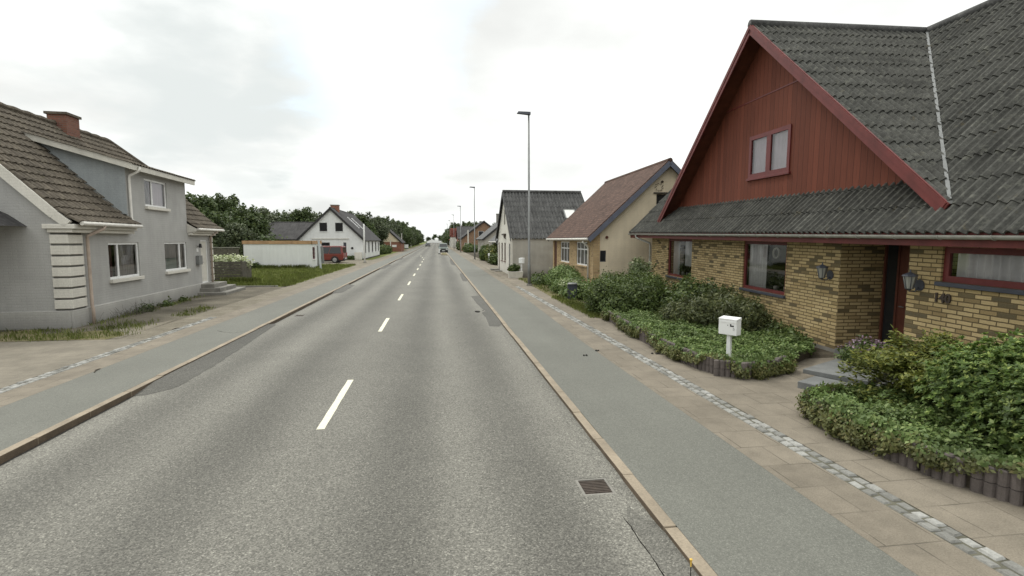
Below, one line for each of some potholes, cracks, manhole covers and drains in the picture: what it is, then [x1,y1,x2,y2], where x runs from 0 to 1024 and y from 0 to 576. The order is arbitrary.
drain grate [575,478,616,496]
crack [623,517,665,576]
